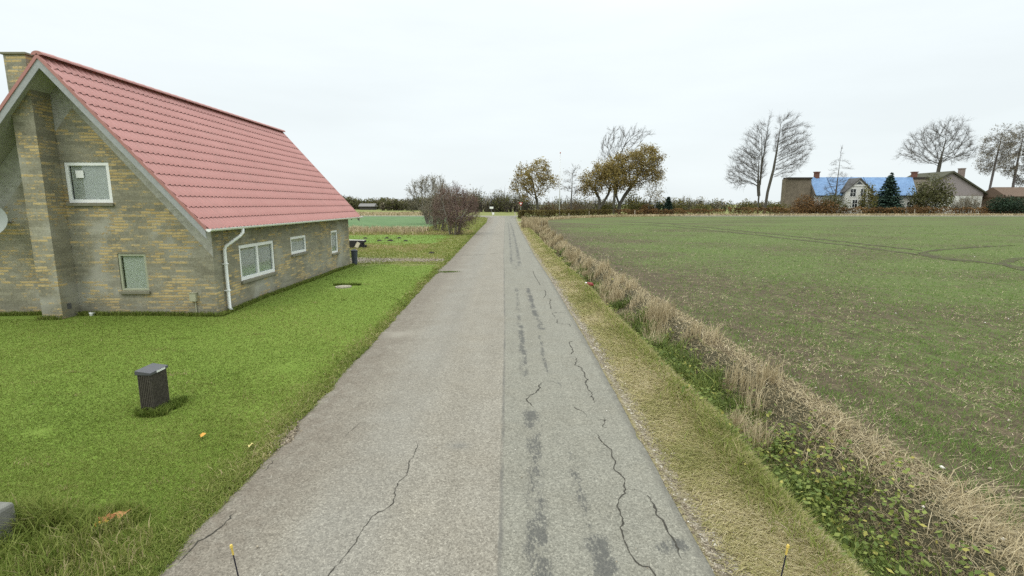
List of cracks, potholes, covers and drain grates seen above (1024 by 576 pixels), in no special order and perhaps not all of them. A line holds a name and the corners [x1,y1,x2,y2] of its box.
crack [328,442,418,576]
crack [179,511,236,562]
crack [533,272,681,576]
